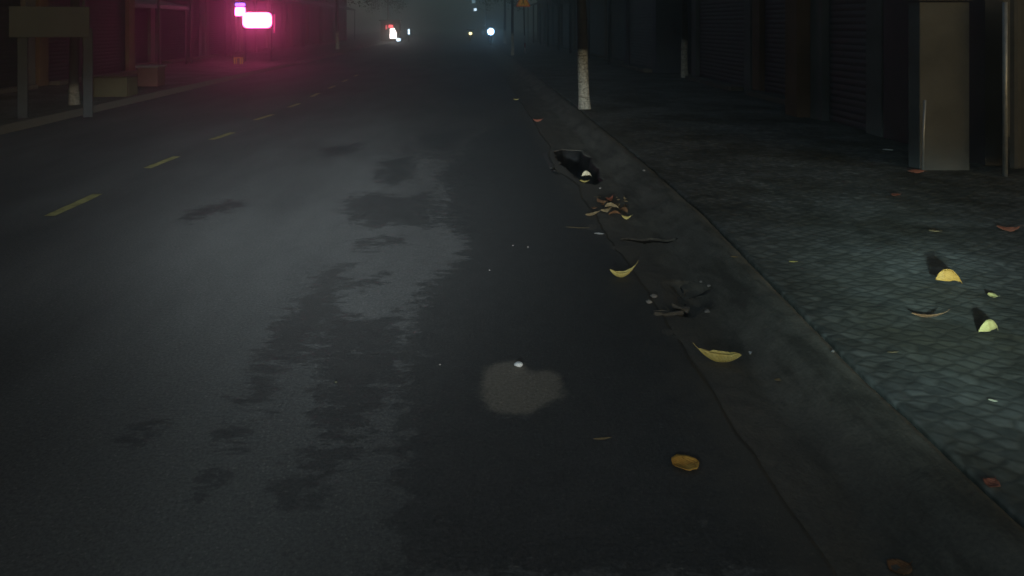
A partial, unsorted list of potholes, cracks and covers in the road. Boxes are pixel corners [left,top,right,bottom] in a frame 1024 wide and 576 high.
pothole [551,149,606,186]
